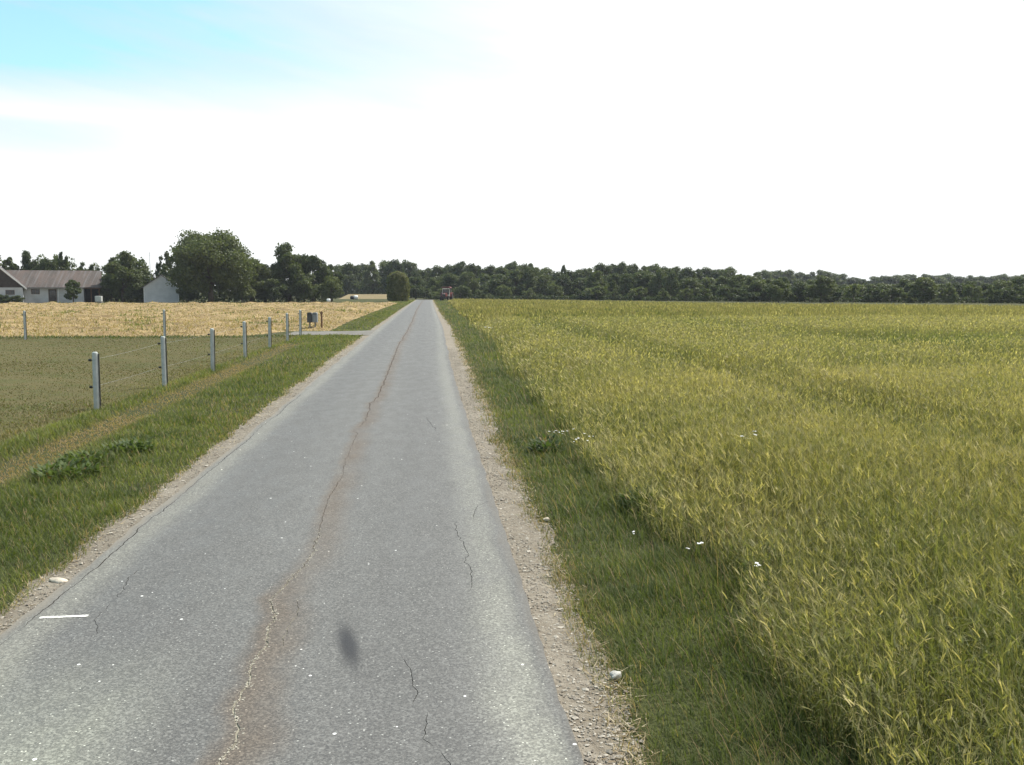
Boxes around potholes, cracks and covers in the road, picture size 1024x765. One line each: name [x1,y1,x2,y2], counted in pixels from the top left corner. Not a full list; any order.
crack [214,306,419,765]
crack [404,660,451,765]
